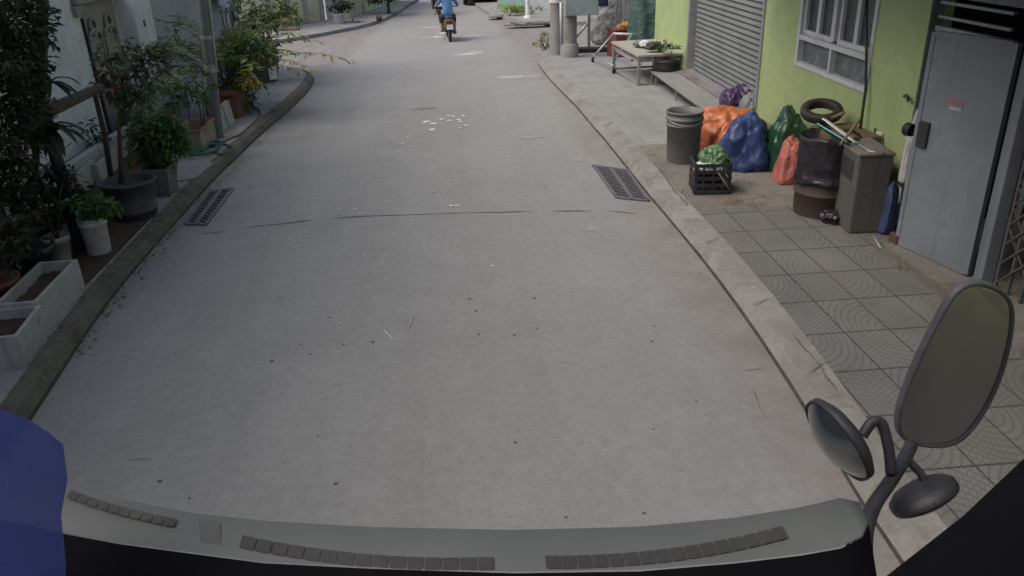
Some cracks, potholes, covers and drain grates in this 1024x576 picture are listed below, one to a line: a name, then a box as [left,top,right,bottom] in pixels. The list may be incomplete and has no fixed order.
drain grate [592,165,650,201]
drain grate [184,187,234,226]
